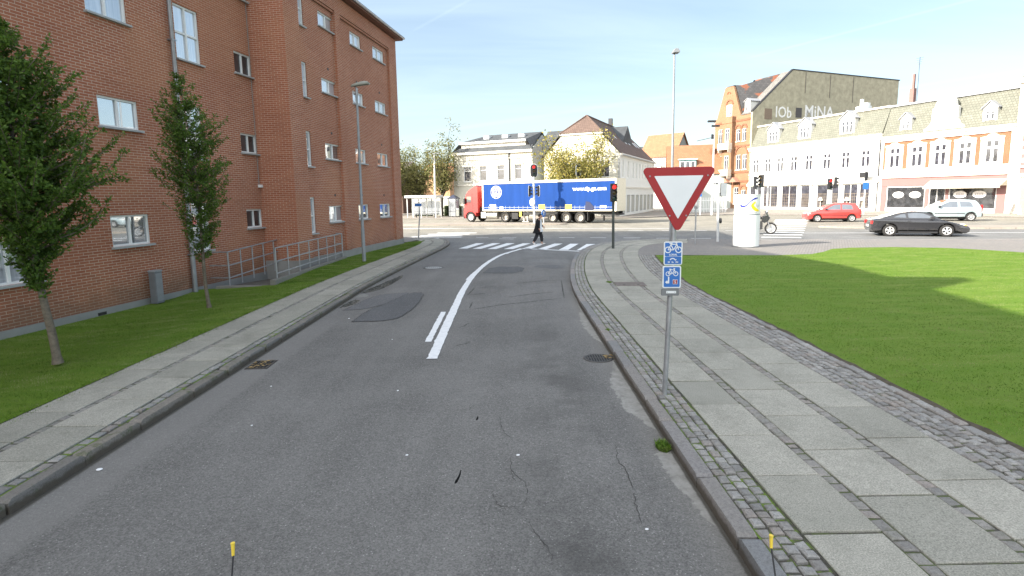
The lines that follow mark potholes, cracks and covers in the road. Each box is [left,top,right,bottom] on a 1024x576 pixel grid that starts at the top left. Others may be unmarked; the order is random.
drain grate [244,360,278,370]
crack [615,445,642,523]
crack [492,458,553,565]
